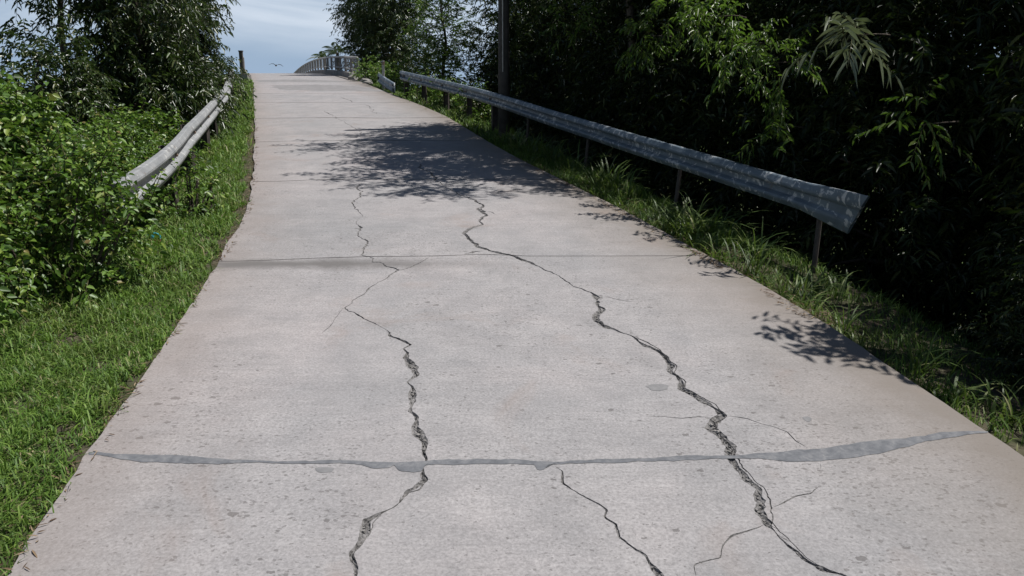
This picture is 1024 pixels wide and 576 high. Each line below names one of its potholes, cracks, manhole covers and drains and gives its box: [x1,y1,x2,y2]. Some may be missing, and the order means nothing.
crack [418,164,846,576]
crack [326,184,429,576]
